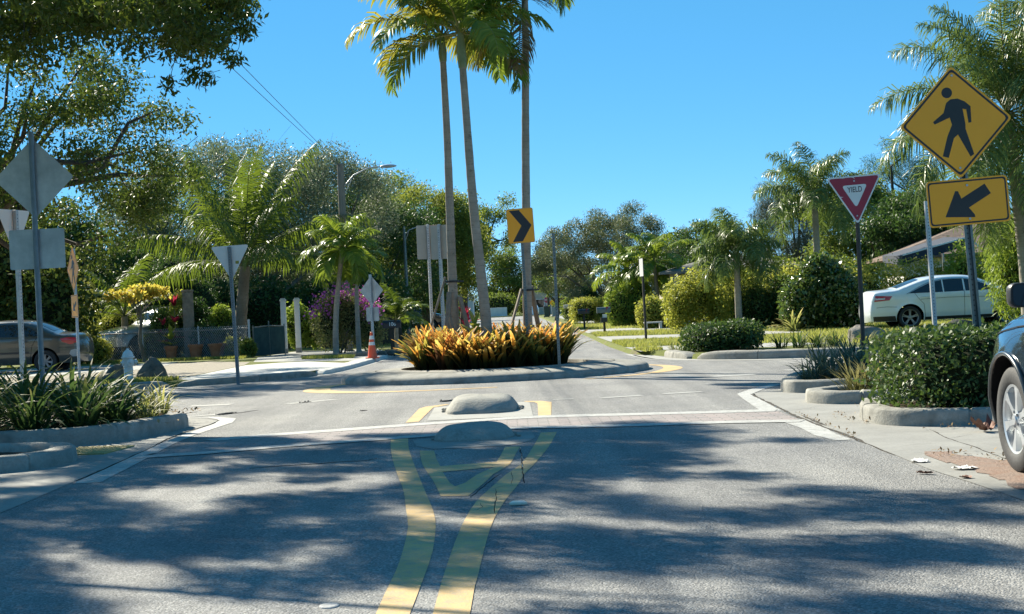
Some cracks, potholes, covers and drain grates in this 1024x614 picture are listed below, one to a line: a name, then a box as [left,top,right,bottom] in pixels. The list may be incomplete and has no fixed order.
crack [470,447,525,513]
